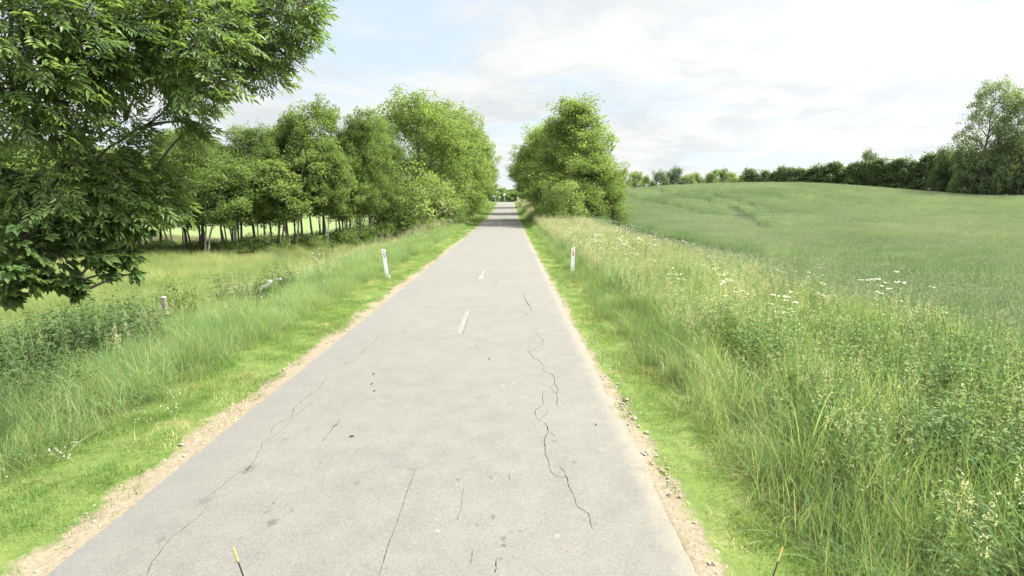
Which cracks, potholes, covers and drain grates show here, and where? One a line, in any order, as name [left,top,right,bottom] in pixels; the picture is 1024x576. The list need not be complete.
crack [523,296,592,528]
crack [146,377,328,576]
